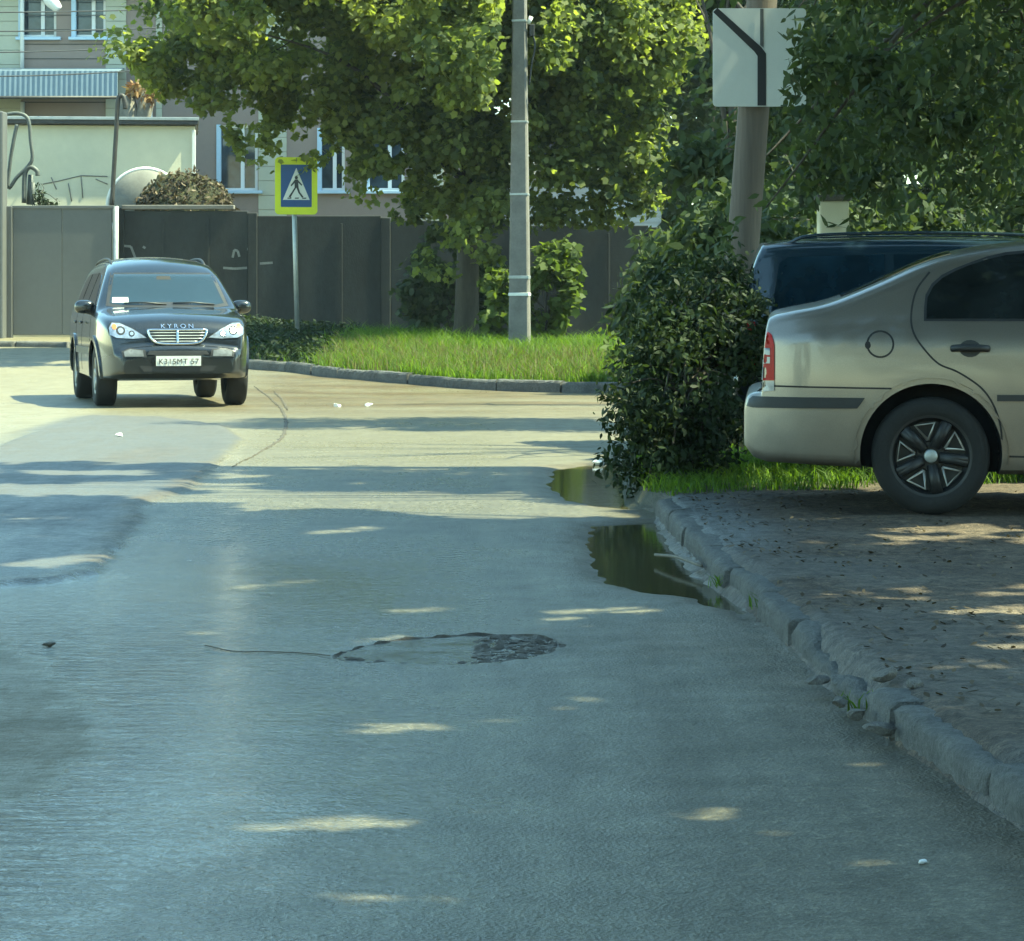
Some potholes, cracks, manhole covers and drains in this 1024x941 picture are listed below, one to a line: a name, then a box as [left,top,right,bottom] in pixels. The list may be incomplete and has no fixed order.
crack [232,386,289,467]
crack [204,645,330,656]
pothole [332,632,567,666]
